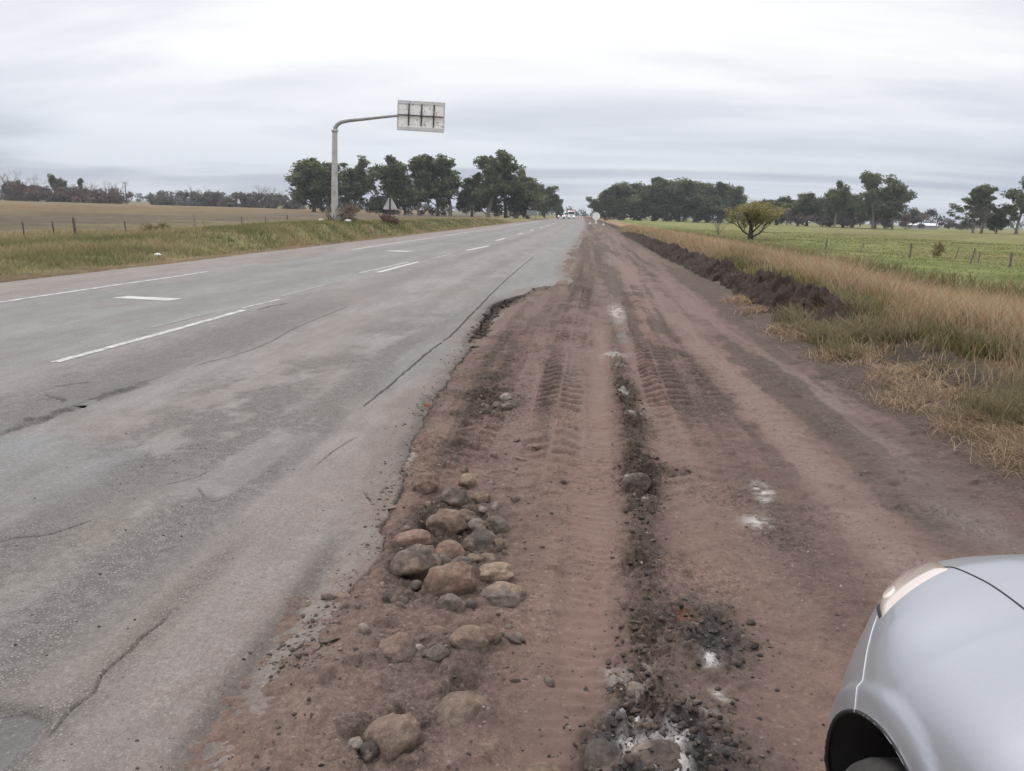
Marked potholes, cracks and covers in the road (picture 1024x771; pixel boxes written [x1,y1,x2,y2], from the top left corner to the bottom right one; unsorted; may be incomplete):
crack [0,464,249,548]
crack [0,254,536,447]
crack [13,602,196,765]
crack [301,433,396,512]
